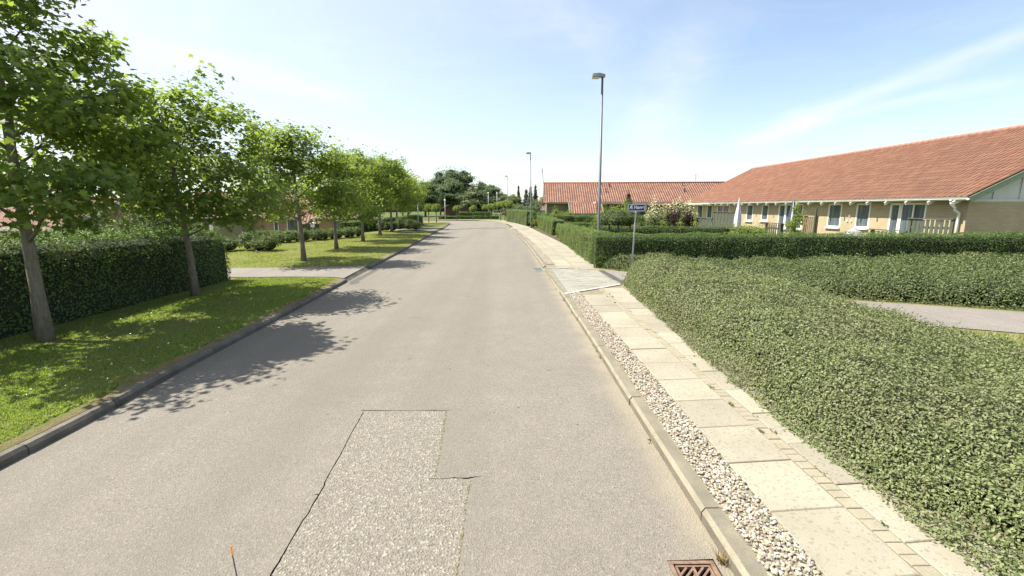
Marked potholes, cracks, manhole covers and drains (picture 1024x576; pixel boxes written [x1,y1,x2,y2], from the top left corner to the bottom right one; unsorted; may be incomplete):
drain grate [667,559,723,576]
